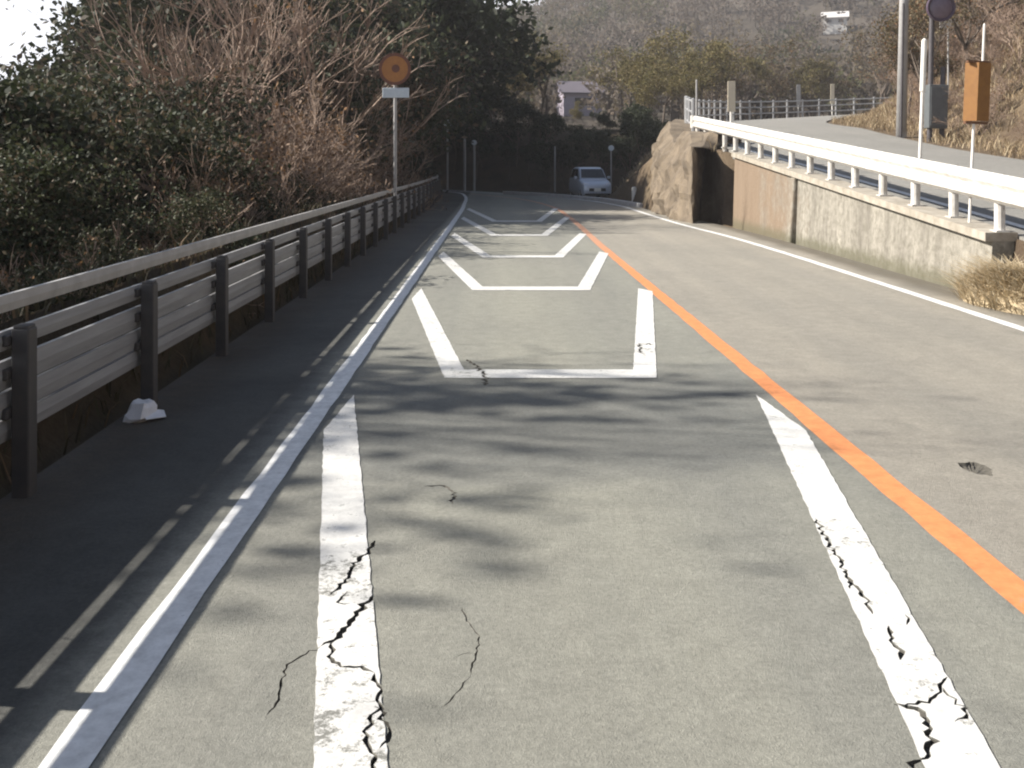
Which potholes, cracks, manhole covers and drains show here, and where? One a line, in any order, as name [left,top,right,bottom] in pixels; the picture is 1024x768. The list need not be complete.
crack [466,359,490,385]
crack [814,520,910,660]
crack [267,540,392,768]
crack [894,678,969,768]
crack [430,485,457,503]
pothole [958,462,994,476]
crack [441,610,480,708]
